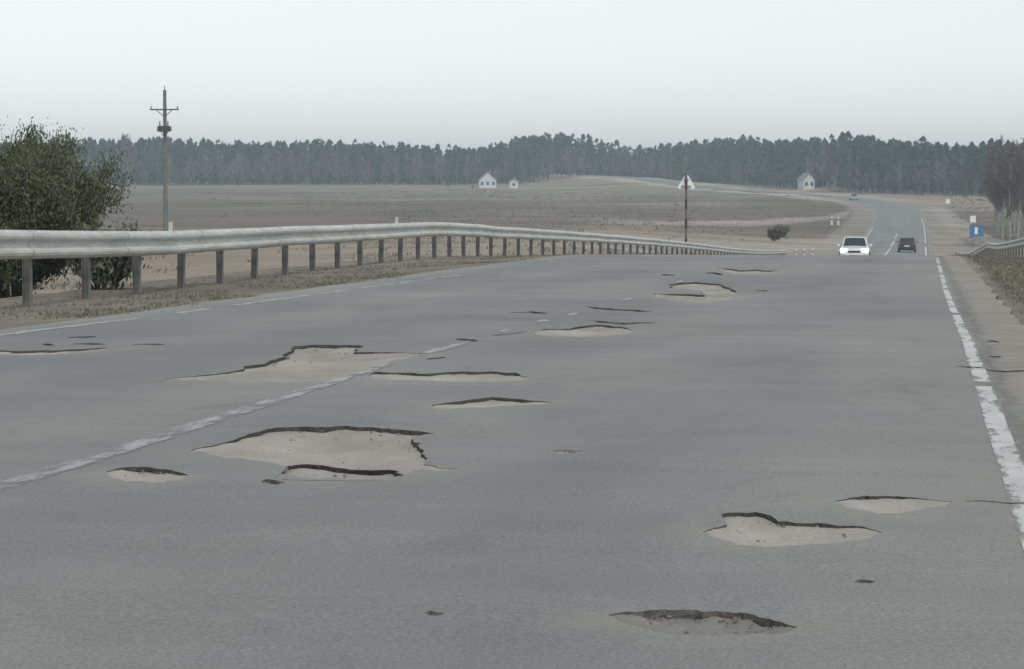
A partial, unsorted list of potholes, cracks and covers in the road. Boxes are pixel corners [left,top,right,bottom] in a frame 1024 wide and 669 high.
crack [958,340,1024,373]
pothole [191,426,456,482]
pothole [169,345,425,382]
pothole [368,371,530,382]
pothole [838,496,951,514]
pothole [107,467,188,483]
pothole [653,282,737,302]
pothole [705,512,881,547]
pothole [533,325,632,337]
pothole [432,397,551,409]
pothole [610,610,797,636]
